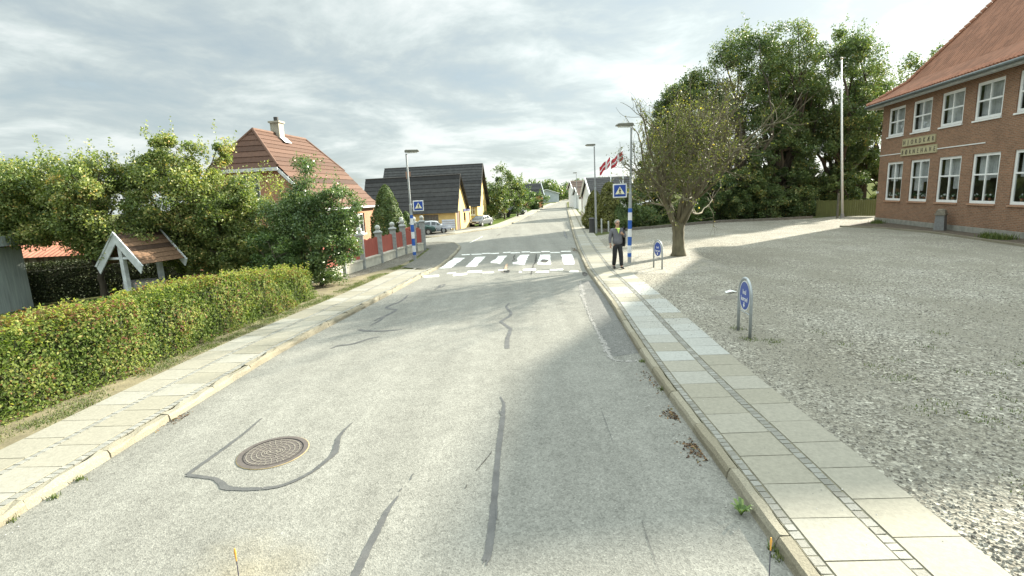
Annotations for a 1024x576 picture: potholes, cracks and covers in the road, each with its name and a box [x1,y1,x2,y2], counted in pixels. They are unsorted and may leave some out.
manhole cover [236,436,309,470]
